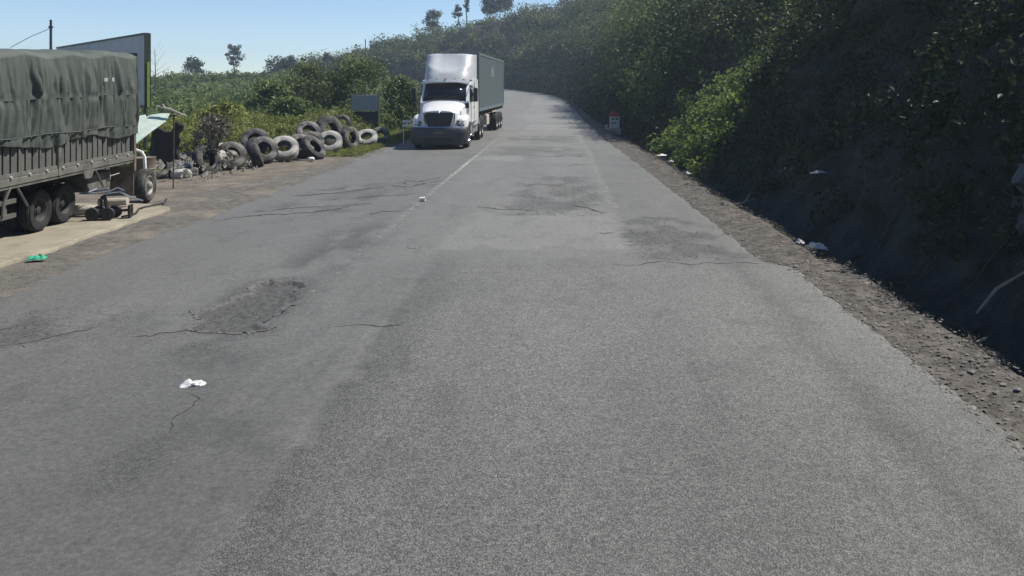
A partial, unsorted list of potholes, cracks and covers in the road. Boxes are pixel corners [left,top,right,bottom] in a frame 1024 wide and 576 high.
pothole [186,278,309,335]
crack [224,177,440,220]
crack [1,303,143,347]
